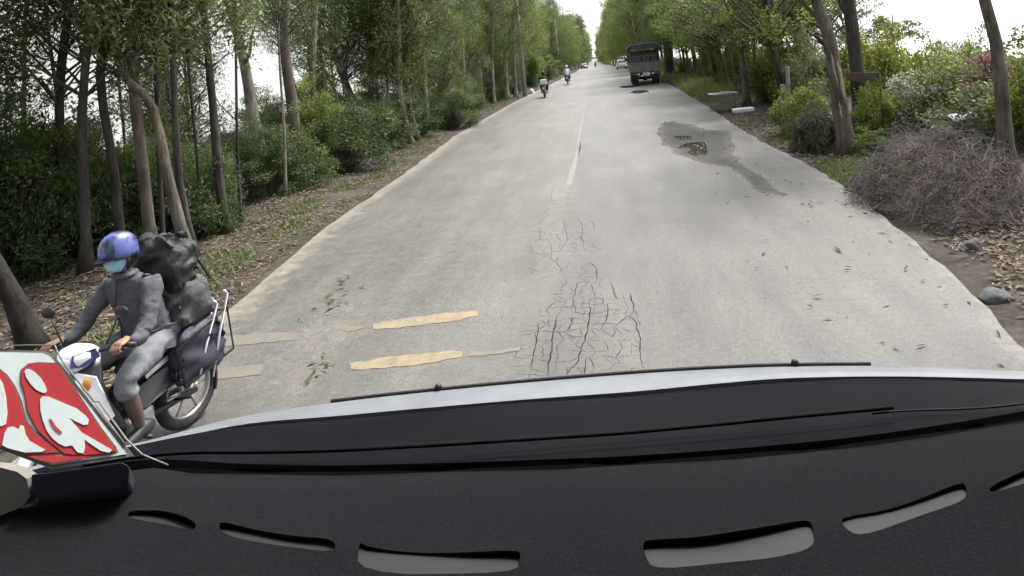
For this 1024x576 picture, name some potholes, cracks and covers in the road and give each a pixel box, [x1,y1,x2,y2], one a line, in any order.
crack [513,191,644,379]
pothole [656,121,790,196]
